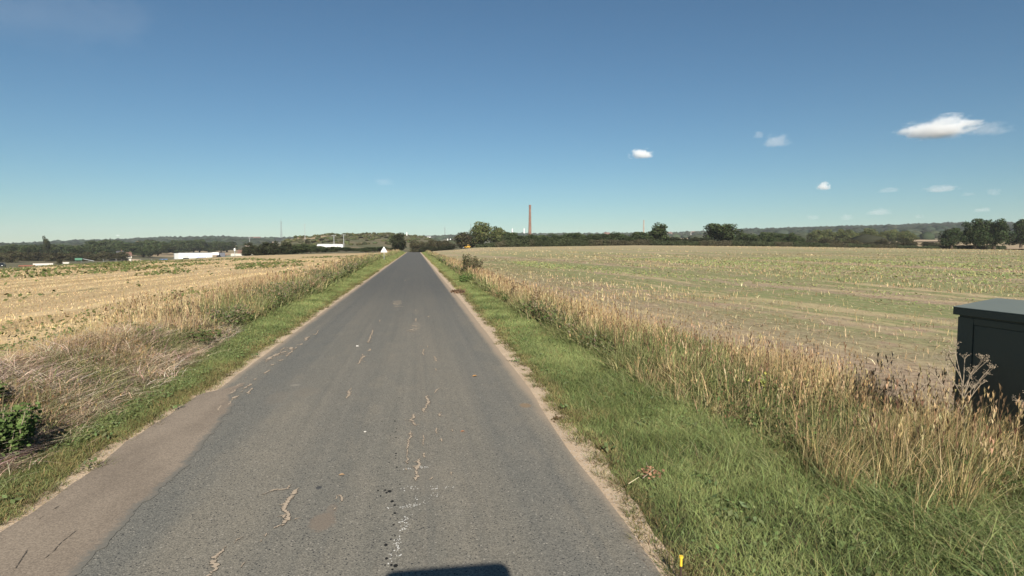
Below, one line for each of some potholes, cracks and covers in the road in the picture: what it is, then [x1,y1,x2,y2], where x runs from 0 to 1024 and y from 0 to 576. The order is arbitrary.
crack [206,537,245,576]
crack [260,485,299,542]
crack [405,388,453,481]
